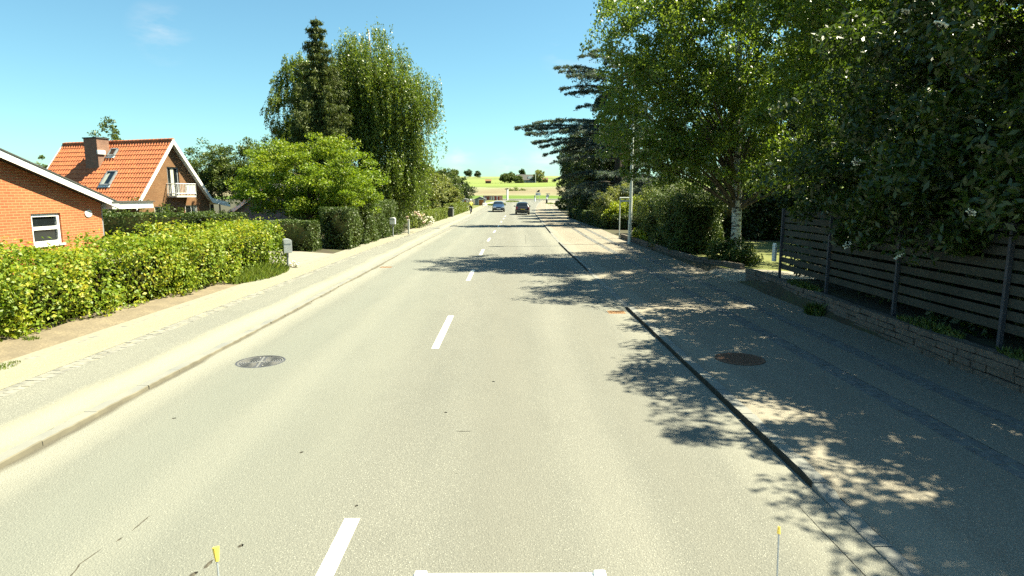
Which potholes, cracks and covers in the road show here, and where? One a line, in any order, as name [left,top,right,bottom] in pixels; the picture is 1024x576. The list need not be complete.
manhole cover [235,355,286,368]
manhole cover [715,352,766,365]
crack [70,517,148,576]
